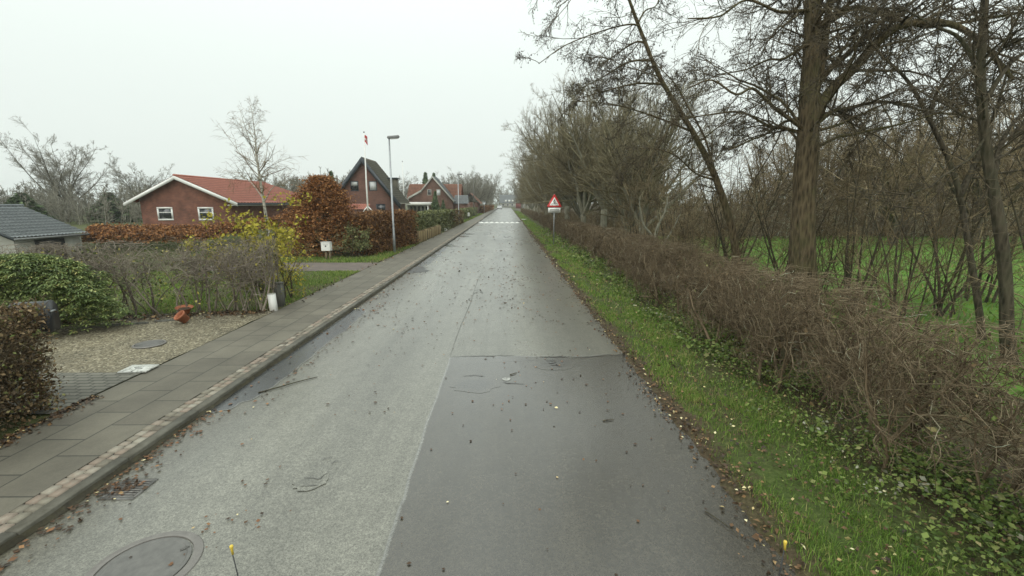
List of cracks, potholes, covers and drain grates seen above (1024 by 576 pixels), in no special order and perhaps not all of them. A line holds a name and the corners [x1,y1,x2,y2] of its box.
manhole cover [131,339,167,348]
manhole cover [85,531,204,576]
drain grate [97,478,159,500]
